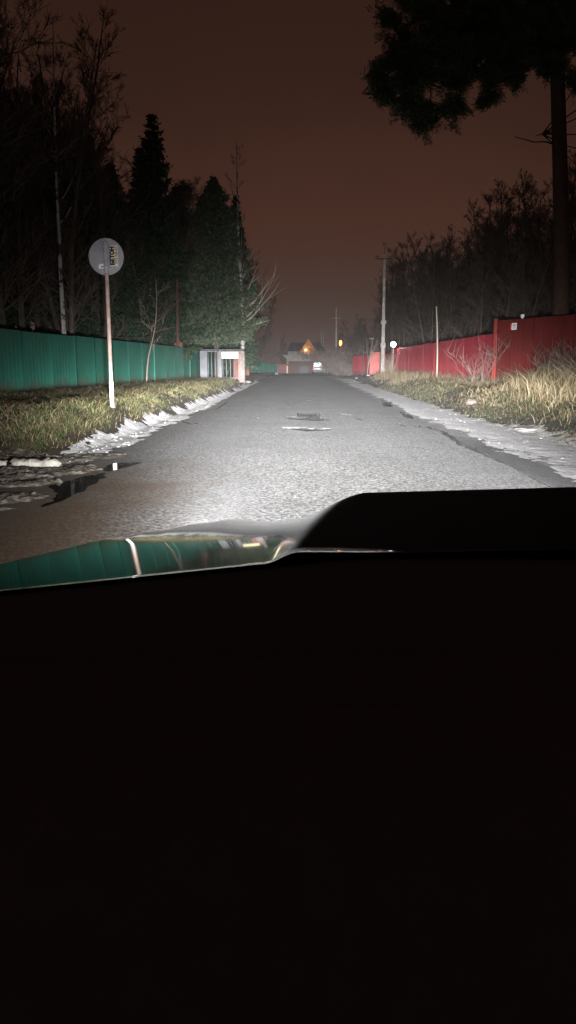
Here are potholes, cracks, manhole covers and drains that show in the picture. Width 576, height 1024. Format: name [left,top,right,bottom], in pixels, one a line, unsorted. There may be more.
pothole [286,413,332,421]
